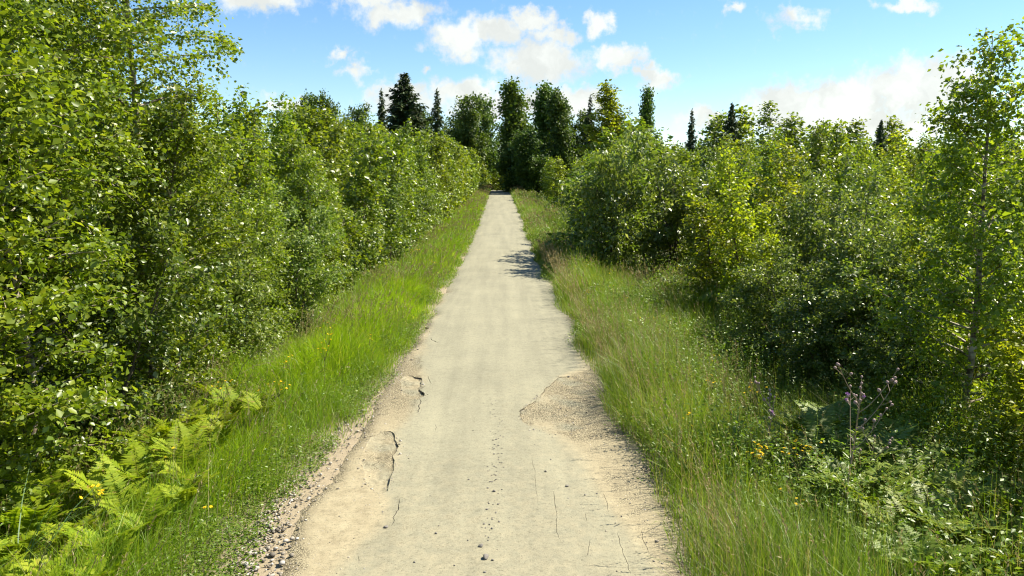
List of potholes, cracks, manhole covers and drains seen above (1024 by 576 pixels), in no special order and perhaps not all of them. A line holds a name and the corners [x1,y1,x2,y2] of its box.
pothole [401,376,425,399]
pothole [519,377,599,433]
pothole [360,431,399,494]
